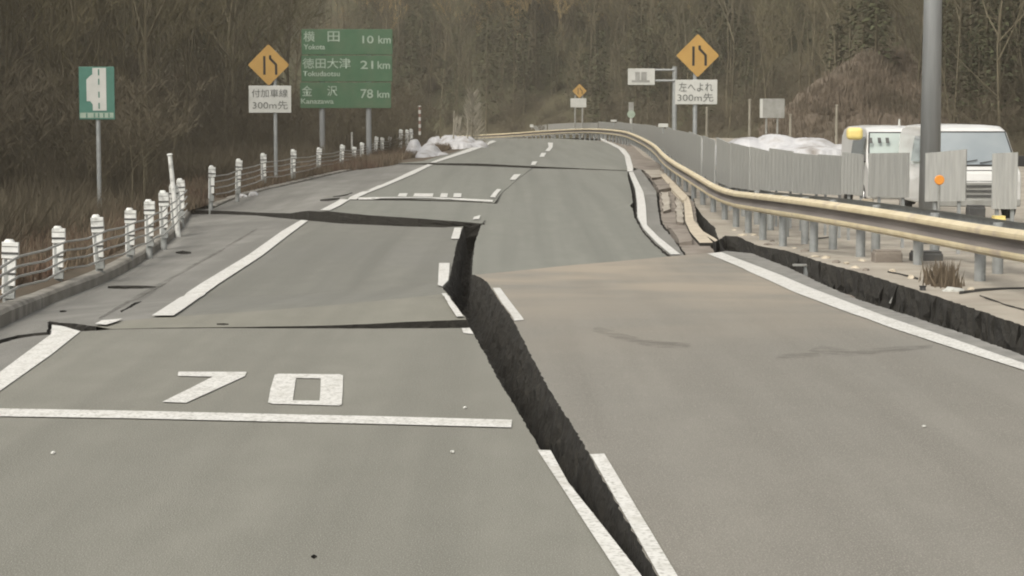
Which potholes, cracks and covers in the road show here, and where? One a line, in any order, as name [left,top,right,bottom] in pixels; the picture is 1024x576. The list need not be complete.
crack [0,163,1024,576]
